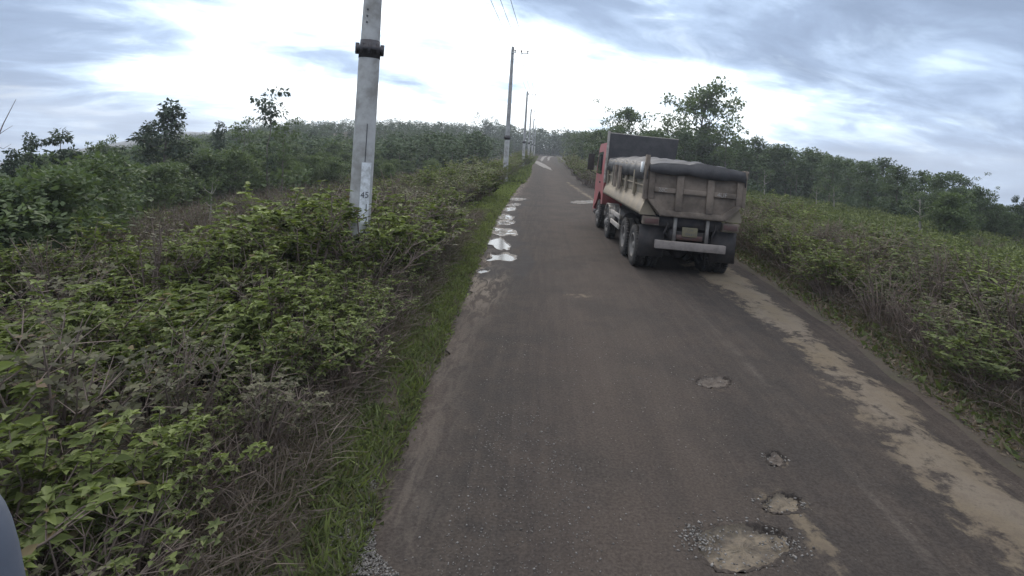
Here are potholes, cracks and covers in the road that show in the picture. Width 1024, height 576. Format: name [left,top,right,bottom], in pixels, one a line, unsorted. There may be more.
pothole [764,449,787,468]
pothole [690,519,798,573]
pothole [693,375,732,389]
pothole [756,490,805,515]
